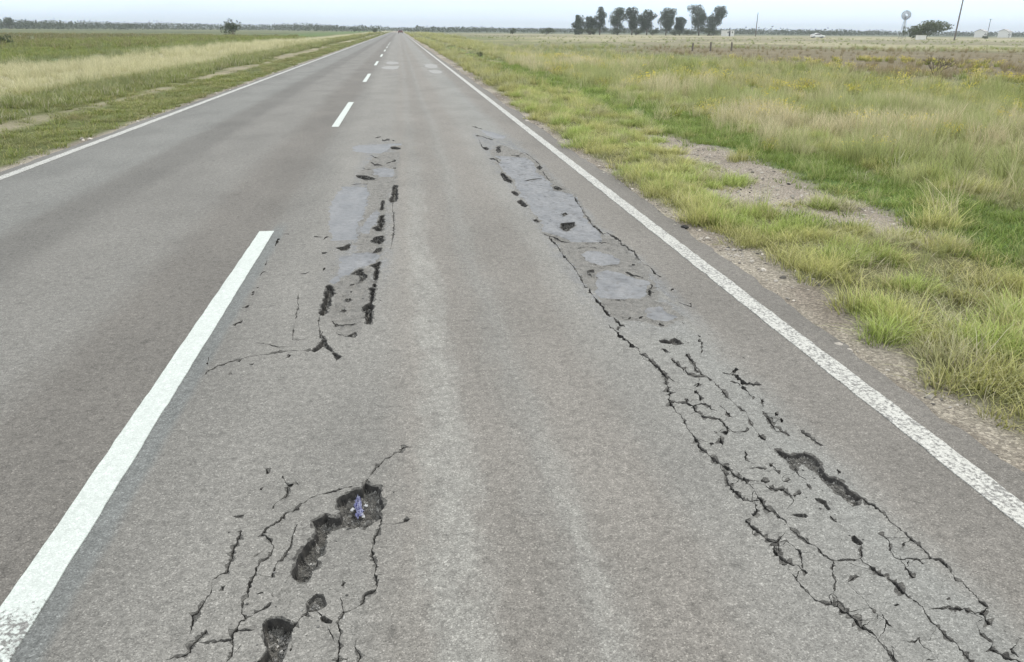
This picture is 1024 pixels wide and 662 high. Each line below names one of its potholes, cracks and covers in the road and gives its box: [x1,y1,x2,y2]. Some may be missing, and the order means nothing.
crack [352,136,396,185]
pothole [290,480,387,584]
pothole [306,594,327,612]
crack [205,233,356,375]
crack [574,197,657,295]
pothole [774,448,864,507]
pothole [257,616,297,662]
crack [544,234,1022,662]
crack [168,445,410,662]
crack [473,126,552,181]
